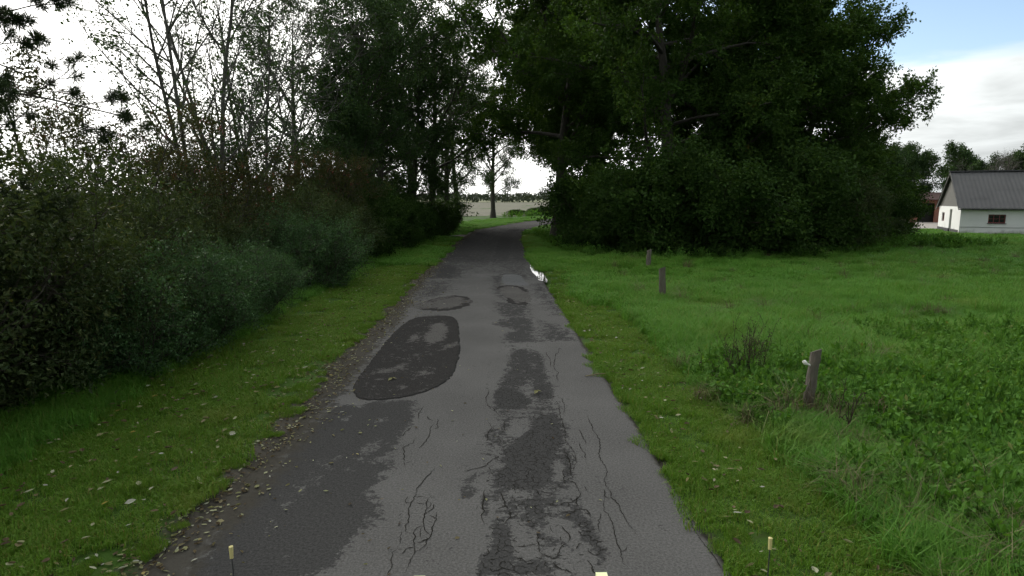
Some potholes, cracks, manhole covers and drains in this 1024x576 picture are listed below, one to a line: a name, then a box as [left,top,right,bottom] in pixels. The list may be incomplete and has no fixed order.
crack [387,409,438,574]
crack [476,349,636,576]
